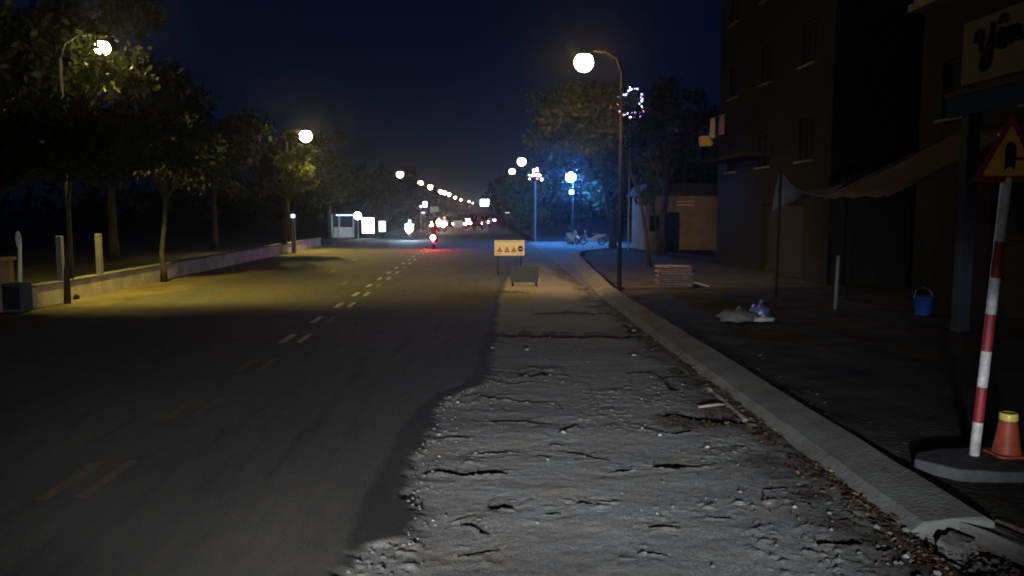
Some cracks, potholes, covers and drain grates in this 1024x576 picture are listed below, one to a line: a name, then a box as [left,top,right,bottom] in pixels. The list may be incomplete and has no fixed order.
crack [556,448,611,461]
crack [435,379,562,455]
crack [636,548,669,557]
crack [457,548,500,557]
